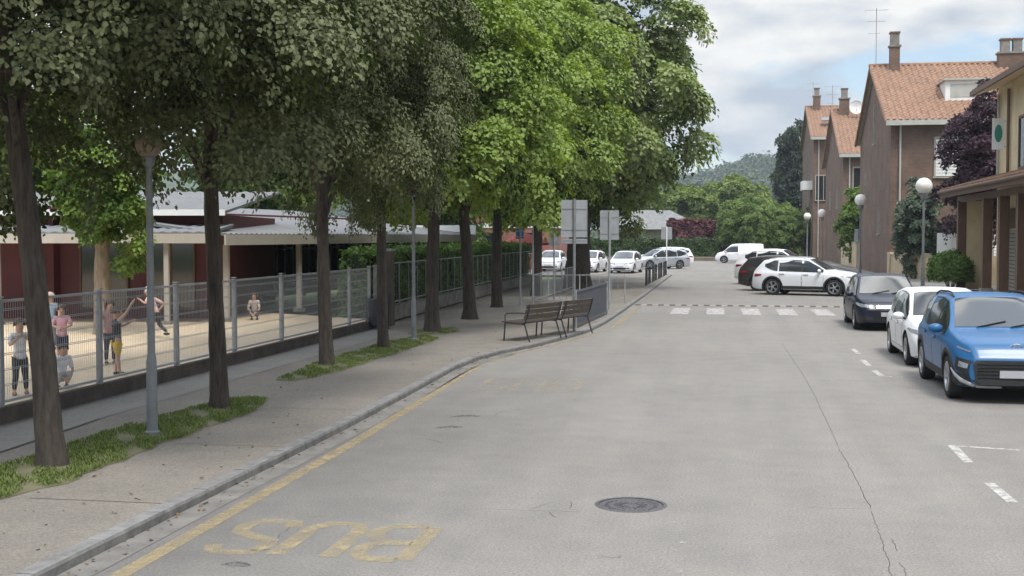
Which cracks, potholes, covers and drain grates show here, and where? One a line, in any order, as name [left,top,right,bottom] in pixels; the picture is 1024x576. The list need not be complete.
crack [267,516,328,546]
manhole cover [595,497,667,513]
